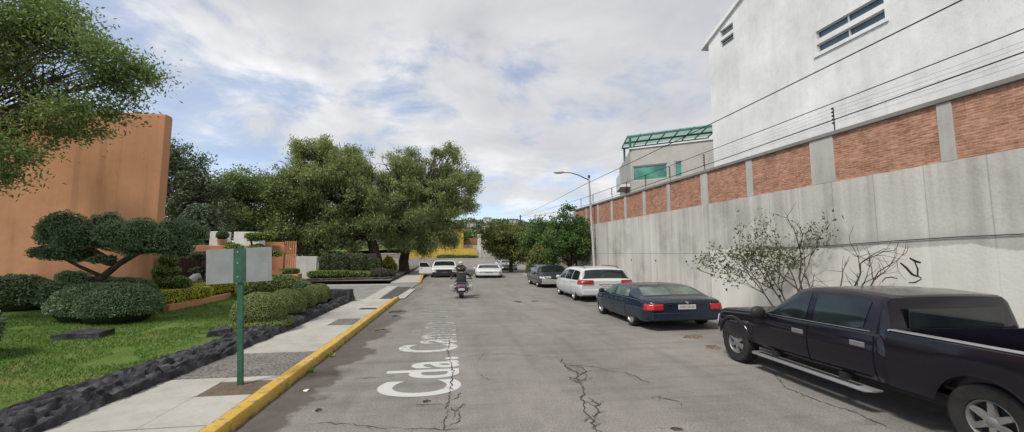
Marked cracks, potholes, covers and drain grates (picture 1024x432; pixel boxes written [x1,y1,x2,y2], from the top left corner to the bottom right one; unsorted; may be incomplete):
crack [311,341,682,432]
crack [773,372,887,427]
